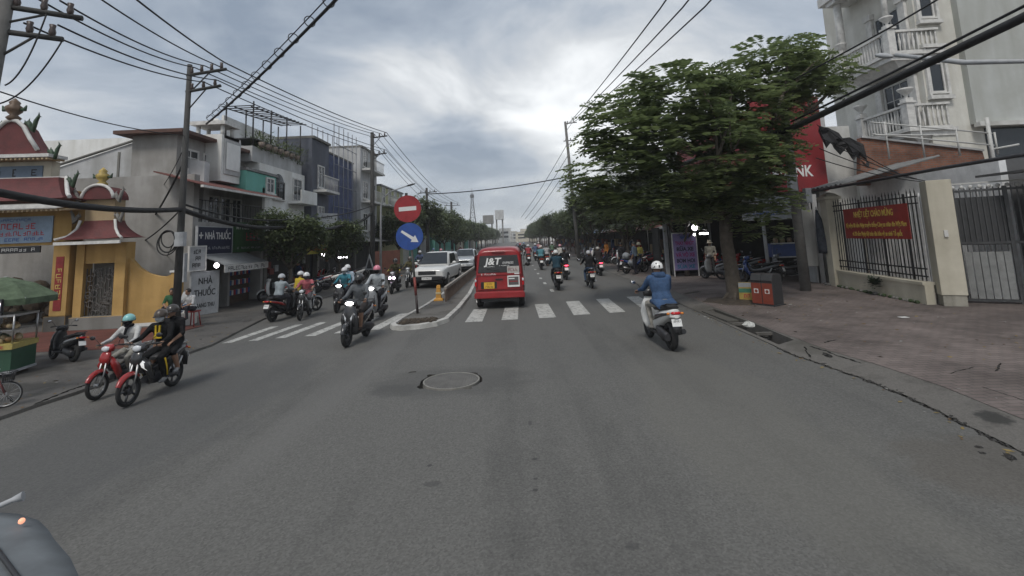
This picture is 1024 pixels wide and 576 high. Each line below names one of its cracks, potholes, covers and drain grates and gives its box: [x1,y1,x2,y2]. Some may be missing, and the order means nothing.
crack [777,340,1024,456]
manhole cover [417,372,482,391]
drain grate [702,309,793,348]
